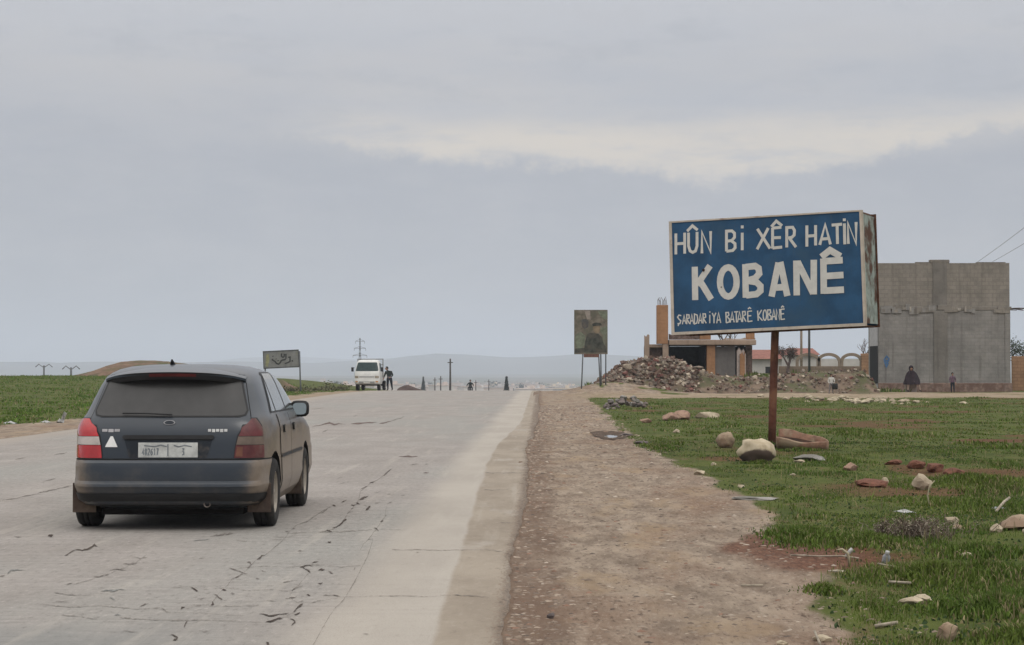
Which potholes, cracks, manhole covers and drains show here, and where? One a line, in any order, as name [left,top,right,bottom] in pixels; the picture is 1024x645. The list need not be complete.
crack [44,469,393,640]
